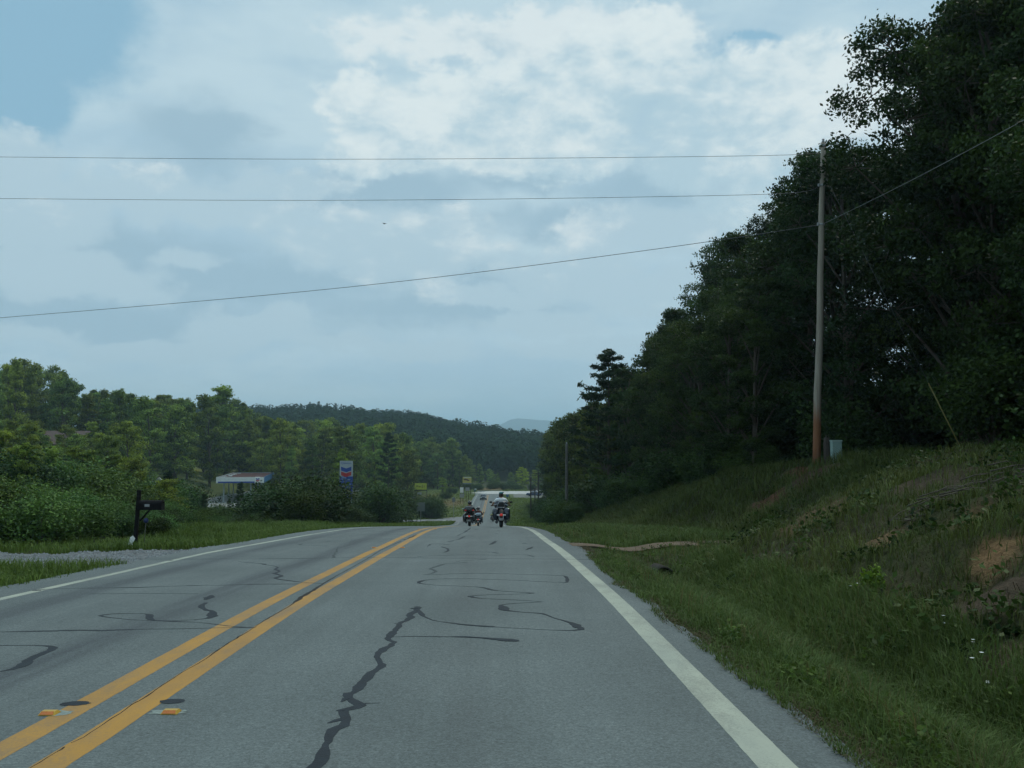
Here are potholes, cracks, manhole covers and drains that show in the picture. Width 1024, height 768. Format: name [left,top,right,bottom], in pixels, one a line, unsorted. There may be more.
crack [7,528,589,632]
